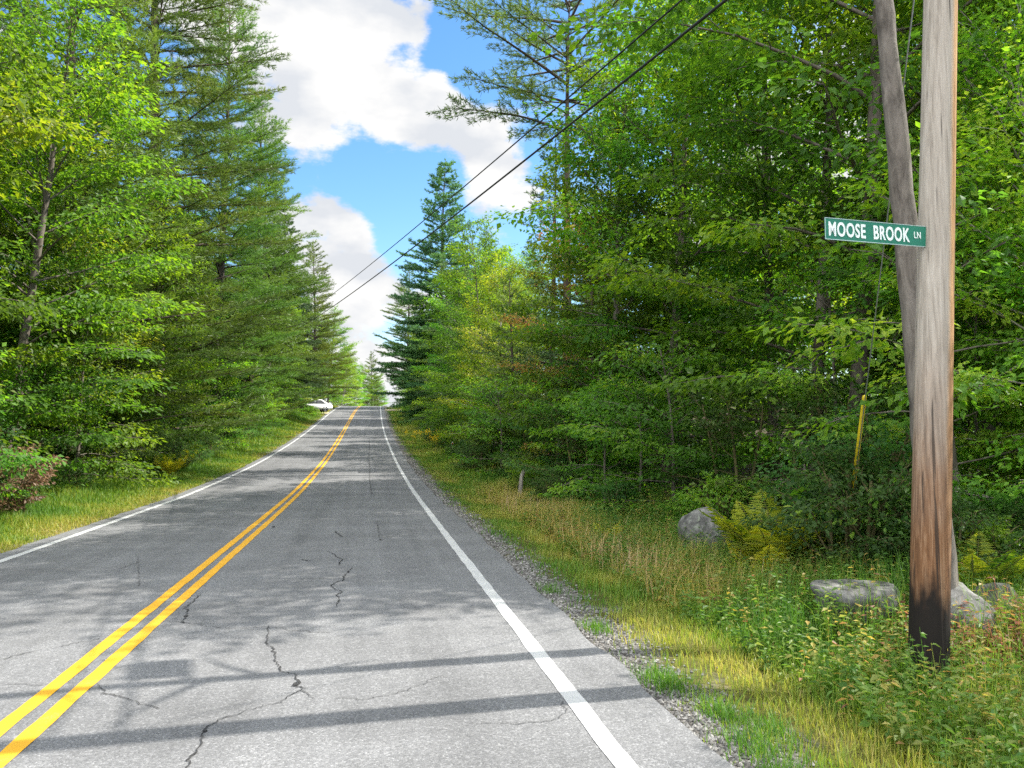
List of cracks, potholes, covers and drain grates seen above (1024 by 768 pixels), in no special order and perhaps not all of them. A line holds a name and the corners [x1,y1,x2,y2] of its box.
crack [306,531,349,606]
crack [180,595,441,768]
